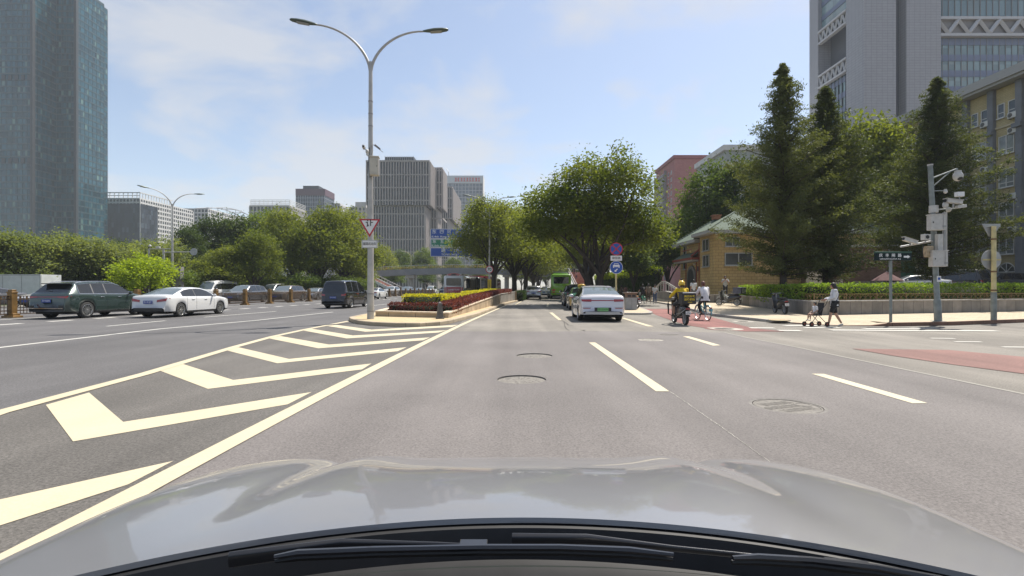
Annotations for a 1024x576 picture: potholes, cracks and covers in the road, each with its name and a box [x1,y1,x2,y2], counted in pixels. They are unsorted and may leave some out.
manhole cover [497,375,546,384]
manhole cover [748,398,829,414]
